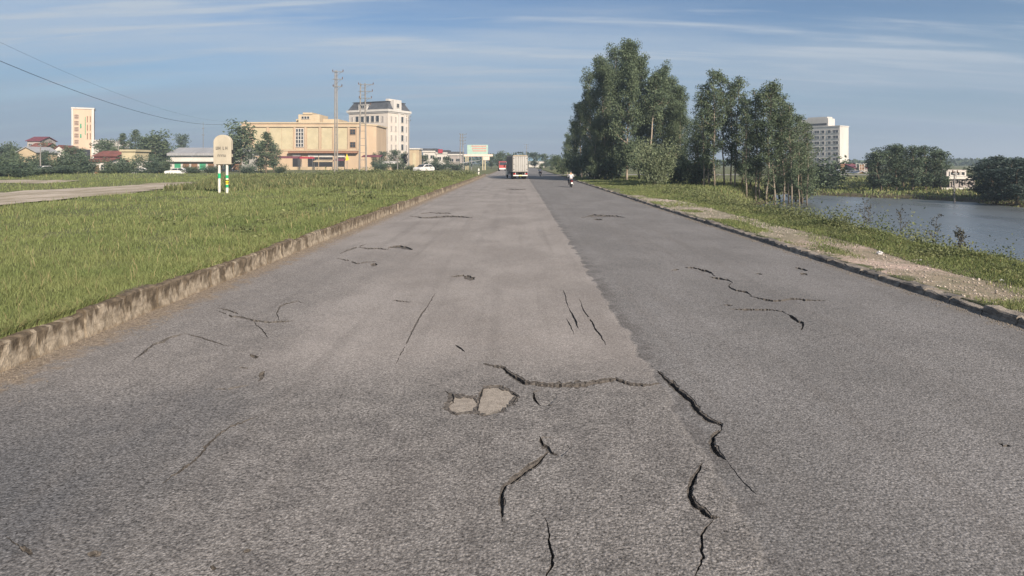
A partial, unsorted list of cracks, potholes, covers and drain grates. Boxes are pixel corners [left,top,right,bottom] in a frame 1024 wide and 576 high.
crack [162,416,257,484]
crack [483,363,756,576]
crack [563,290,606,345]
crack [673,267,826,330]
pothole [442,385,520,417]
crack [134,301,303,360]
